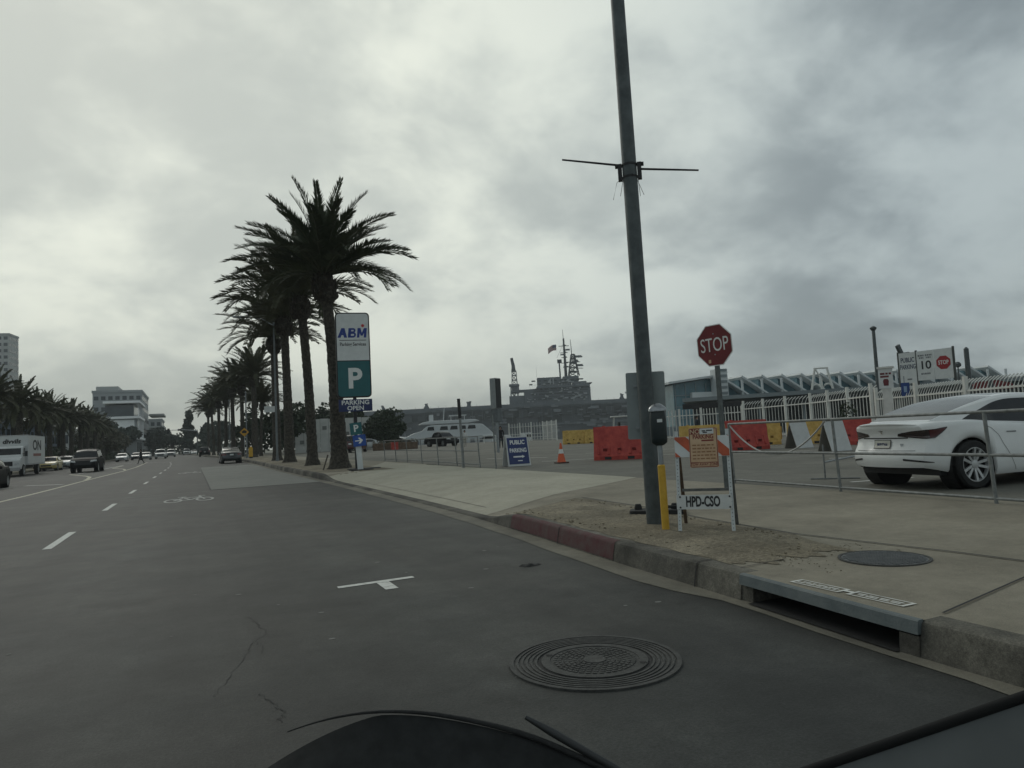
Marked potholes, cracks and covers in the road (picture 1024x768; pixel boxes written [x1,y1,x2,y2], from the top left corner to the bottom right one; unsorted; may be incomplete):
manhole cover [837,550,933,567]
crack [214,617,273,695]
drain grate [739,573,926,658]
manhole cover [509,635,682,692]
